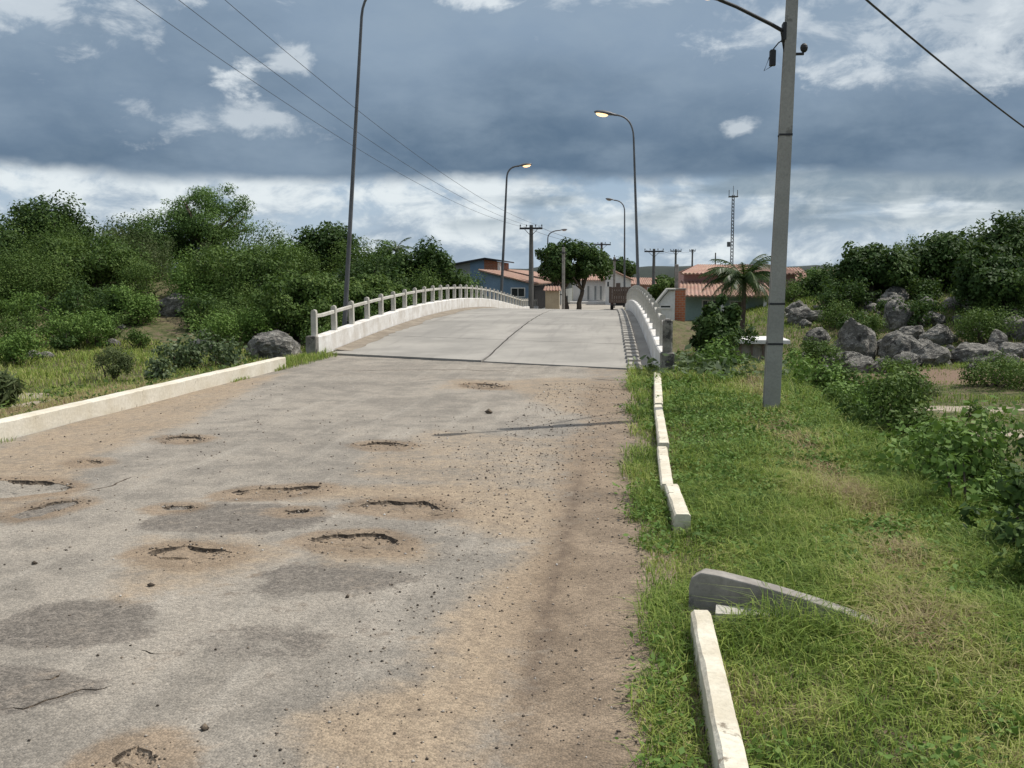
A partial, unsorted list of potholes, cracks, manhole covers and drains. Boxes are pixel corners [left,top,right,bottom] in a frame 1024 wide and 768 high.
pothole [348,499,454,516]
pothole [91,746,167,768]
pothole [223,482,327,498]
crack [1,674,110,710]
pothole [10,499,92,519]
pothole [0,477,76,498]
pothole [163,434,206,443]
pothole [359,441,416,449]
pothole [308,531,407,551]
pothole [136,543,235,564]
